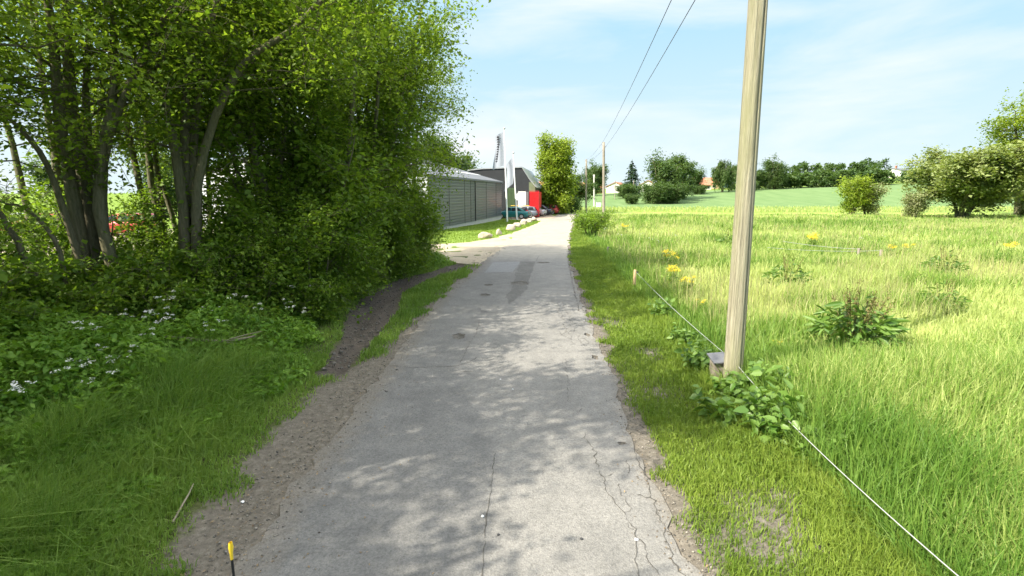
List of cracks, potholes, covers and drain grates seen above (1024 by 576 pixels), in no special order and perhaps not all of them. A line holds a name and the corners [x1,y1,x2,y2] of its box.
crack [584,436,686,576]
